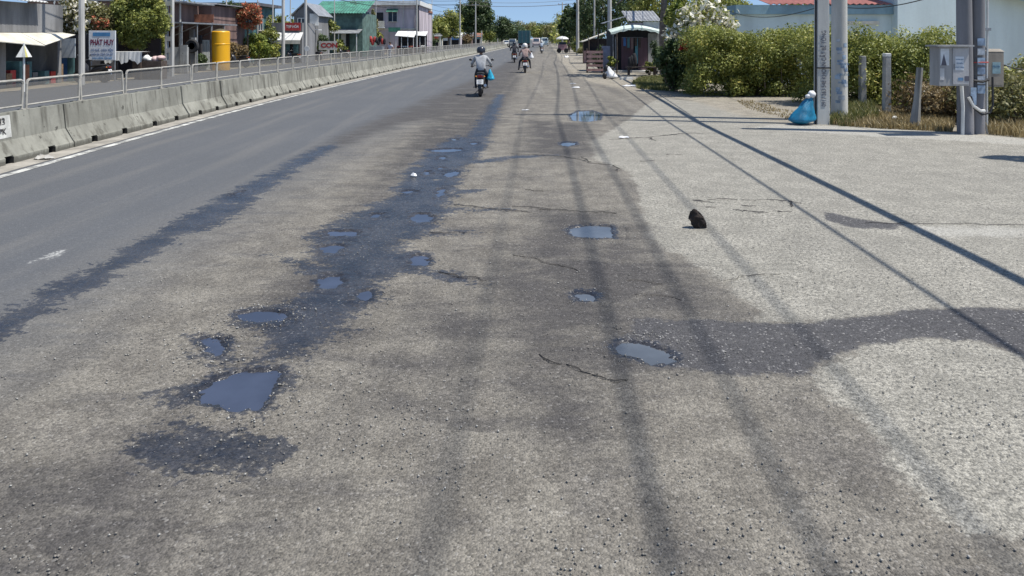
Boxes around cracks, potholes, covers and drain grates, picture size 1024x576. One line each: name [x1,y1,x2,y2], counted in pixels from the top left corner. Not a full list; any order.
pothole [554,286,615,307]
crack [514,255,578,271]
pothole [564,110,606,123]
crack [539,354,628,383]
pothole [215,303,308,330]
pothole [174,358,307,424]
pothole [398,210,446,226]
pothole [592,334,698,374]
pothole [174,329,249,365]
